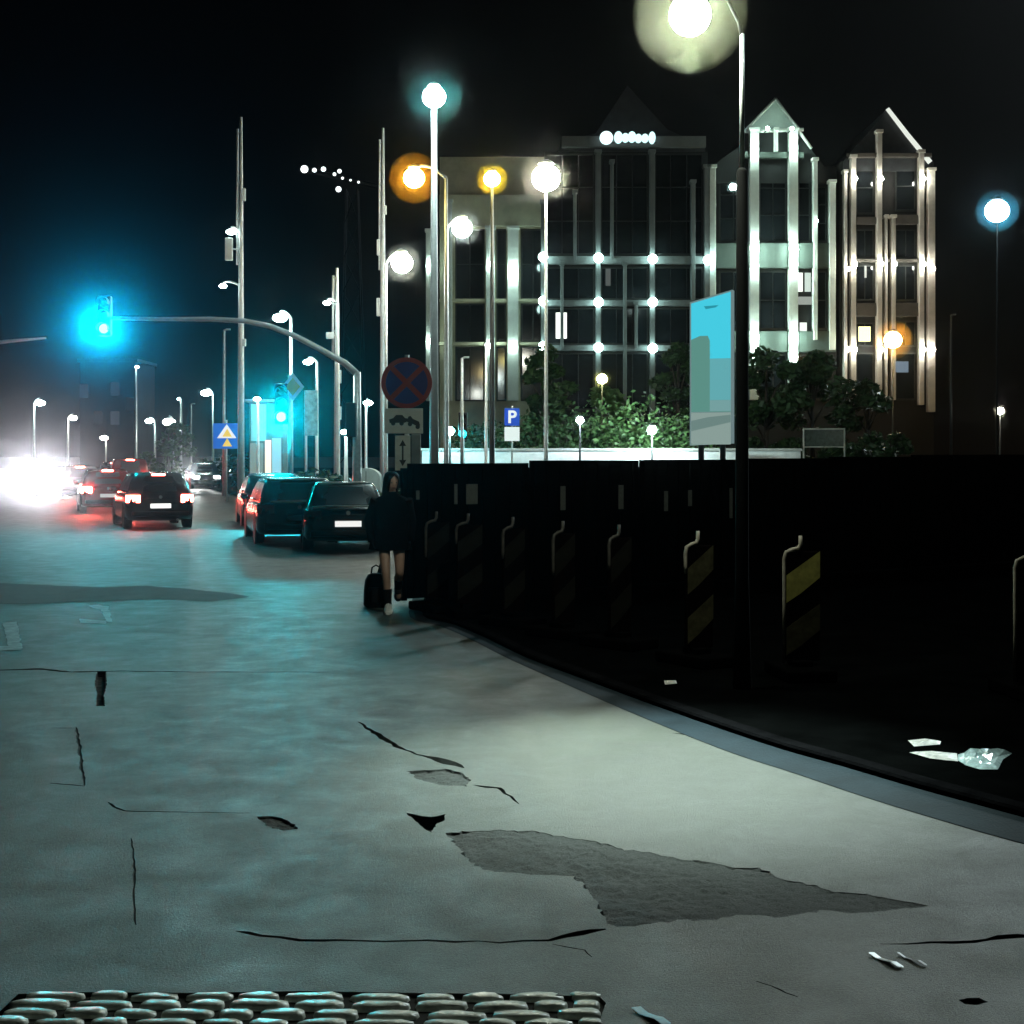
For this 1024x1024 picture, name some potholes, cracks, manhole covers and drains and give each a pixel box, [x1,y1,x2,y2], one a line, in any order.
pothole [95,671,107,706]
crack [237,929,606,957]
crack [359,722,464,768]
pothole [407,813,446,832]
crack [475,785,519,804]
pothole [257,816,298,831]
crack [901,934,1024,945]
crack [108,802,222,813]
